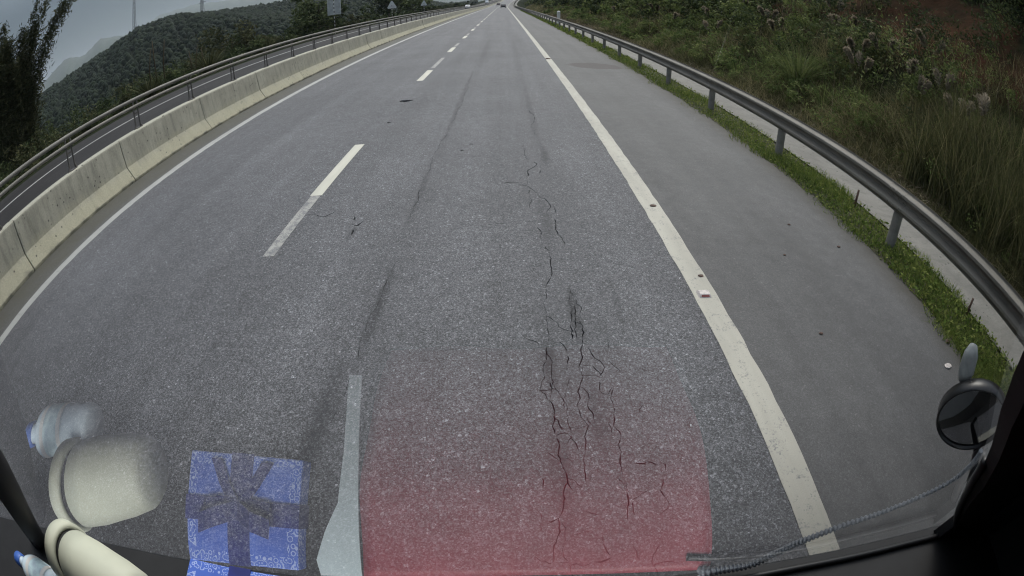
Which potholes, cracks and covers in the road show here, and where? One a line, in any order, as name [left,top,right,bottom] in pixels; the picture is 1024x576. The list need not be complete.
crack [334,75,472,416]
crack [507,111,669,541]
